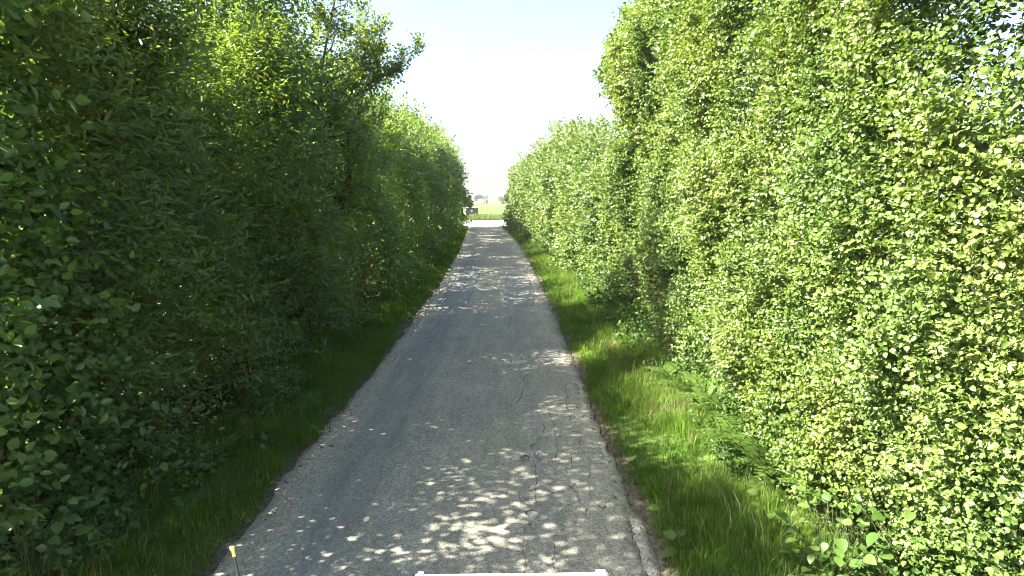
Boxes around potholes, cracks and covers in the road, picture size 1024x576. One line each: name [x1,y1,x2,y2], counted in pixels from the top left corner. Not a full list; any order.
crack [539,384,613,534]
